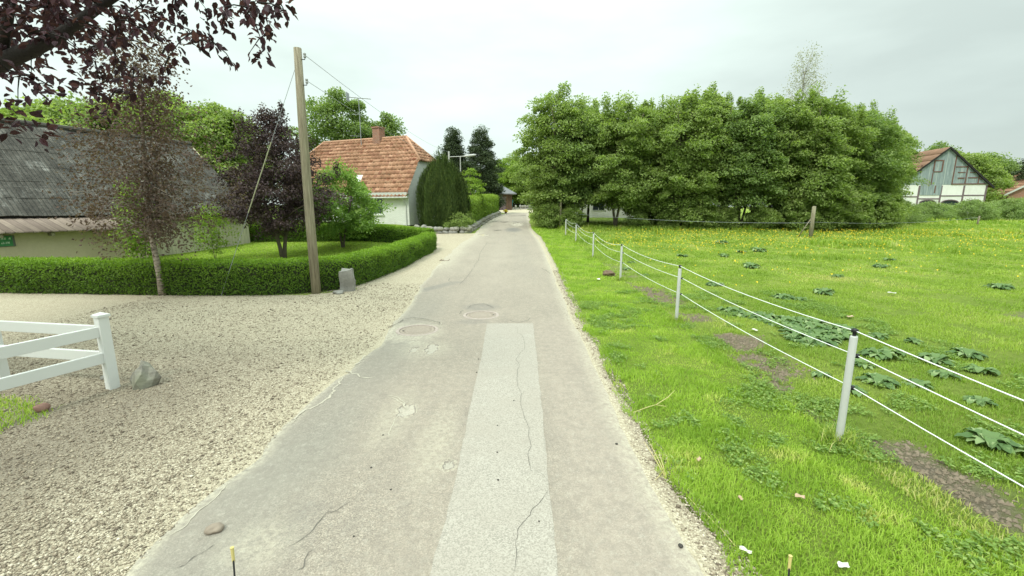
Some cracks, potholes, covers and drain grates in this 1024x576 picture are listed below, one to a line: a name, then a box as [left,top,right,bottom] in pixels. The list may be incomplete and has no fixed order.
pothole [394,402,418,418]
manhole cover [463,311,499,319]
manhole cover [396,324,439,336]
crack [510,319,547,570]
crack [293,356,369,422]
pothole [439,458,457,473]
pothole [423,343,440,355]
